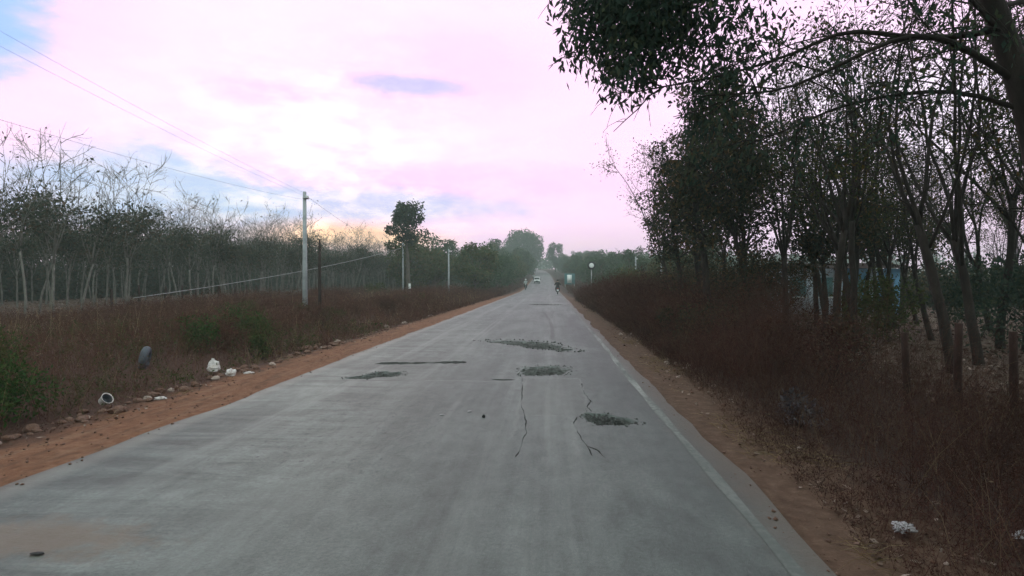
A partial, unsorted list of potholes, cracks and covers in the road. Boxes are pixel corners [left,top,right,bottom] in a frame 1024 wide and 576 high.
pothole [341,371,407,380]
pothole [516,365,577,376]
pothole [579,410,645,427]
crack [573,383,608,461]
pothole [473,338,585,352]
crack [493,379,527,457]
